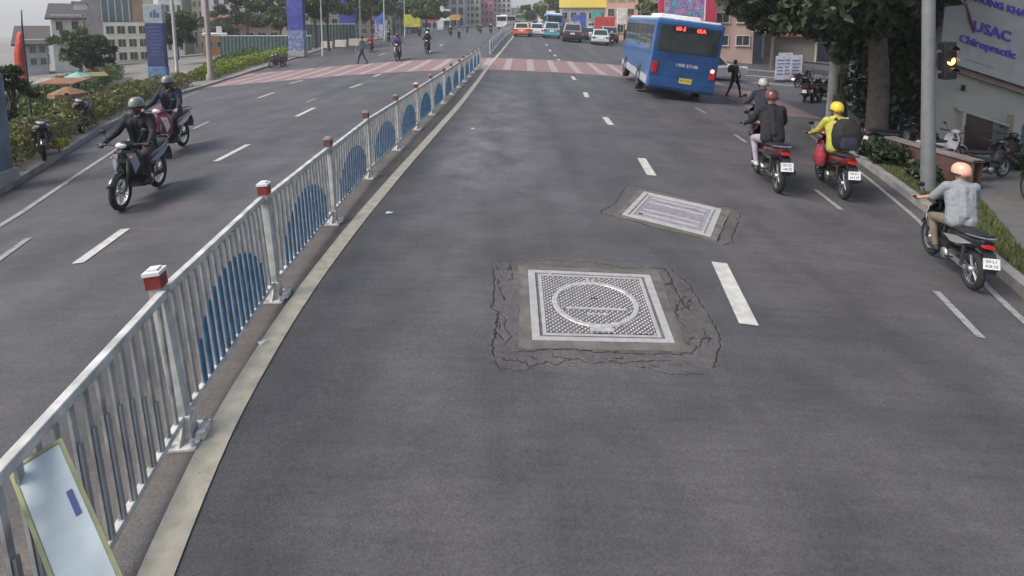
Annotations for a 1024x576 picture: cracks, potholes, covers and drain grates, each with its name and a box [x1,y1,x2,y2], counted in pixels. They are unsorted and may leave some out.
crack [601,186,743,246]
manhole cover [613,189,732,242]
crack [491,253,721,375]
manhole cover [518,265,690,353]
